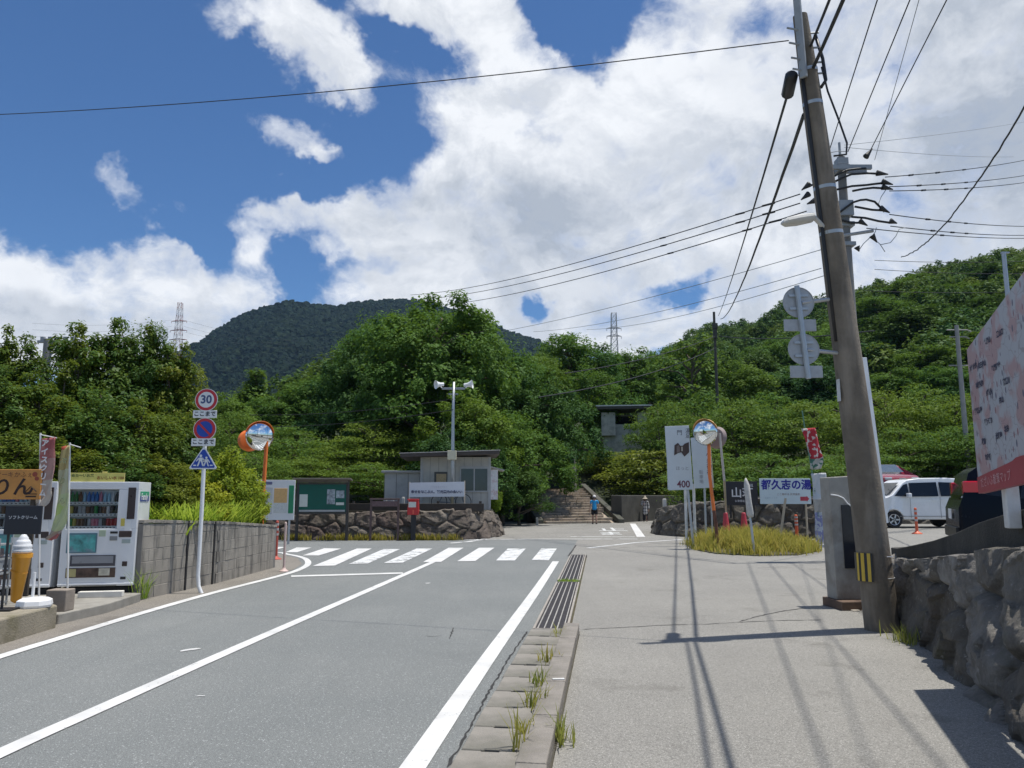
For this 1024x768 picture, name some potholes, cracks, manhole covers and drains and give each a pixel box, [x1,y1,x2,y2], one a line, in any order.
drain grate [557,555,586,582]
drain grate [533,582,579,629]
